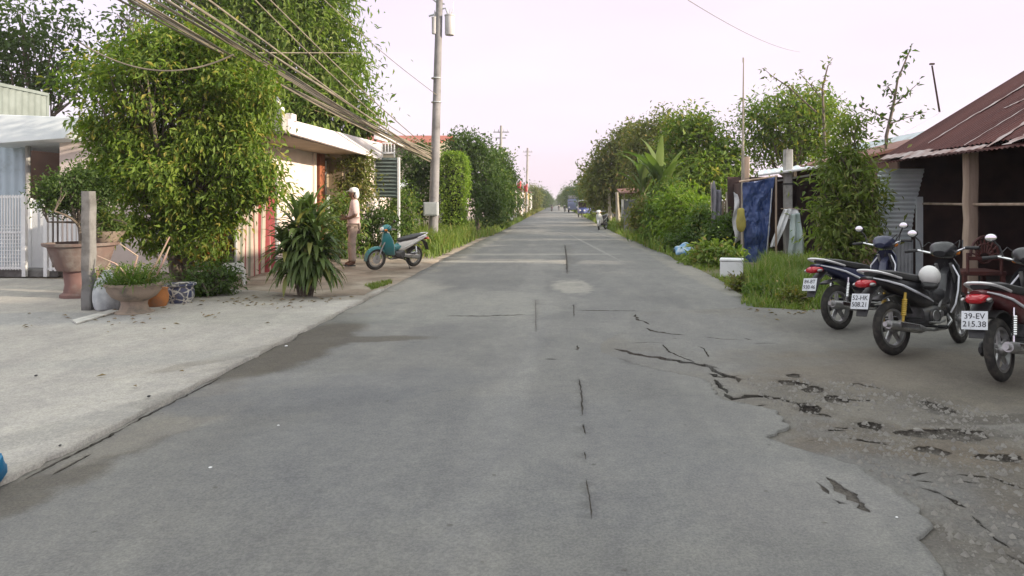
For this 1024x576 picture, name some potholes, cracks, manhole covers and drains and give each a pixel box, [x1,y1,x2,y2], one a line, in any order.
pothole [974,454,1022,463]
crack [584,452,592,518]
pothole [915,446,950,456]
pothole [893,428,989,442]
crack [573,305,887,445]
